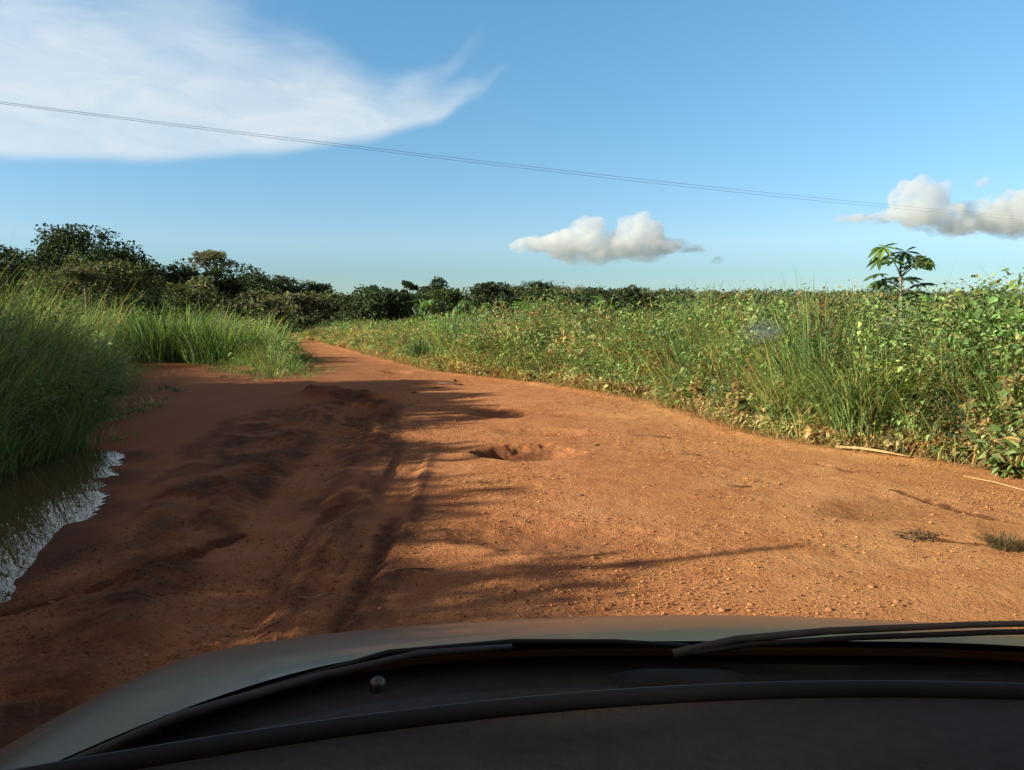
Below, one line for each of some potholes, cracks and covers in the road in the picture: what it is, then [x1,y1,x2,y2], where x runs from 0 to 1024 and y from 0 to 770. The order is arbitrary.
pothole [461,442,594,463]
